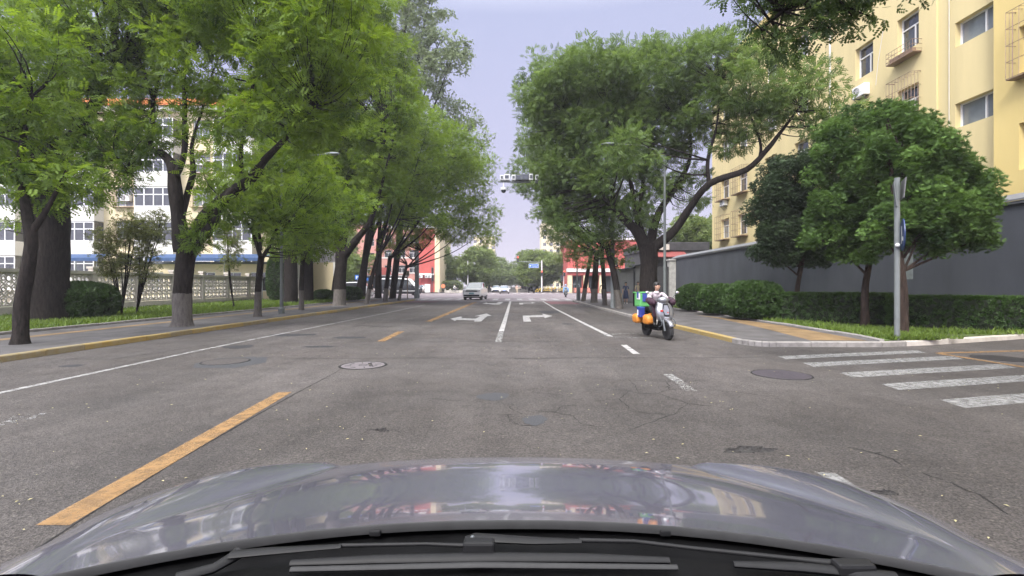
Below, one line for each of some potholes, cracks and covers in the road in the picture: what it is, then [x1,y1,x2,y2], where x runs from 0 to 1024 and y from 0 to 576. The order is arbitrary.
manhole cover [750,369,814,380]
crack [922,472,1008,514]
crack [597,379,768,430]
manhole cover [338,361,388,370]
crack [442,388,593,426]
